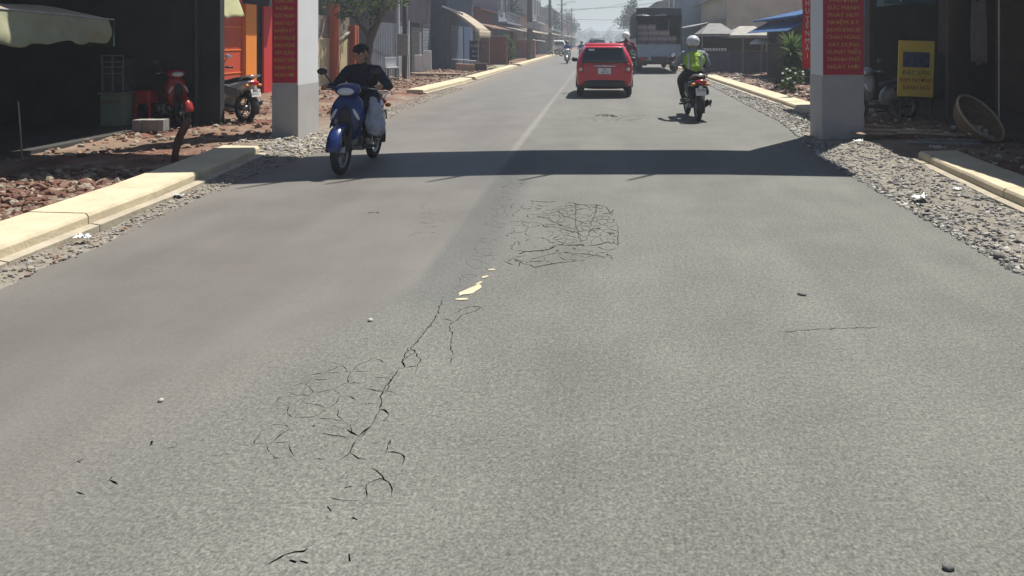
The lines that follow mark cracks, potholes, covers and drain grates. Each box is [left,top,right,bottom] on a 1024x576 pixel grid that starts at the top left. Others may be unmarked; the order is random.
crack [267,308,440,562]
